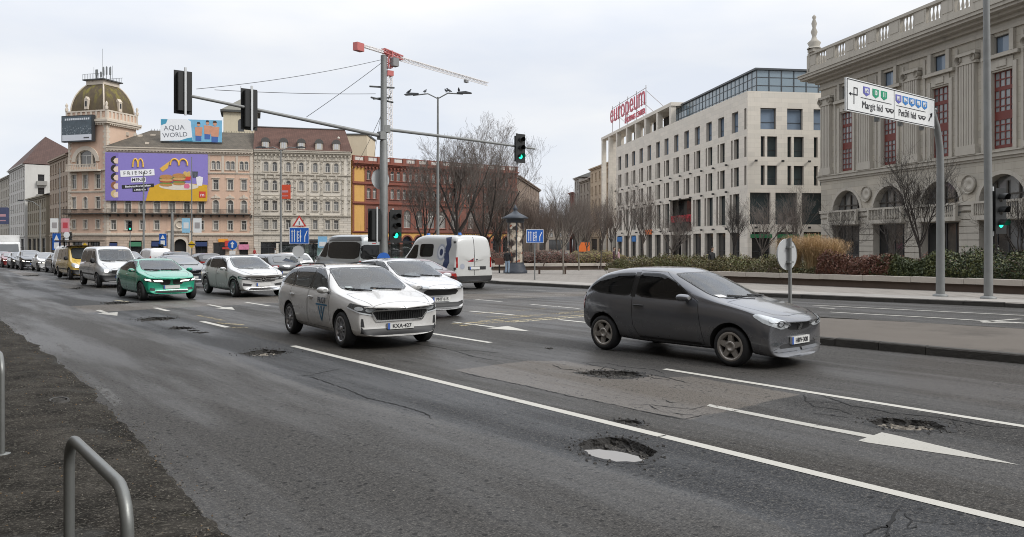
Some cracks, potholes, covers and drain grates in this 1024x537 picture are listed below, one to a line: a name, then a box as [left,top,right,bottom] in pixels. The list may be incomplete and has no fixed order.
pothole [855,414,965,434]
crack [295,369,430,418]
pothole [564,431,668,470]
crack [803,395,1024,433]
pothole [573,368,656,380]
pothole [608,417,650,426]
pothole [229,347,303,357]
crack [863,508,933,537]
